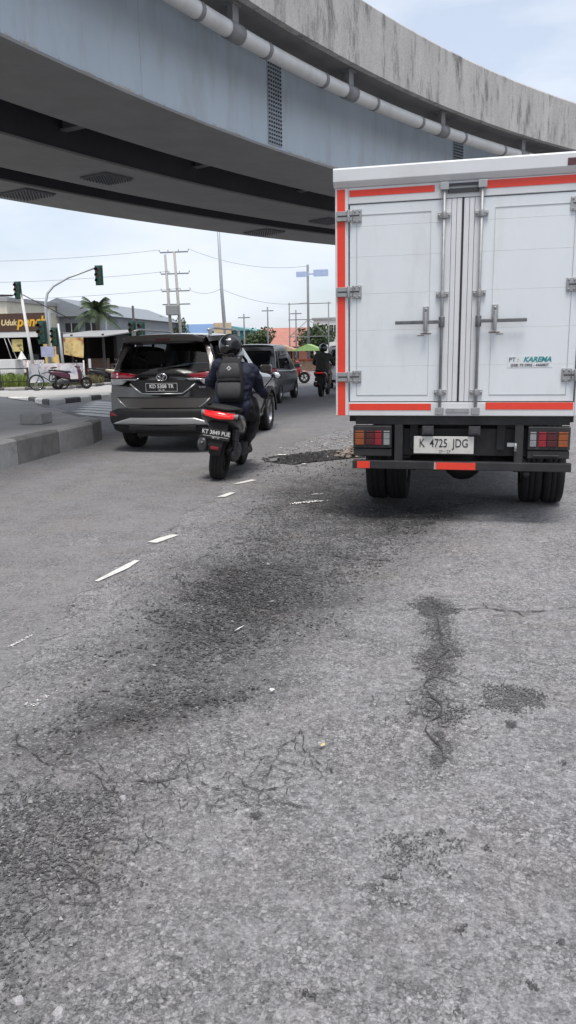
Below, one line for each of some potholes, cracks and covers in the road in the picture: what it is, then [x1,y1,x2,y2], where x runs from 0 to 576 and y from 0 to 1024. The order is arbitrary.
crack [0,726,344,966]
crack [356,600,575,768]
pothole [263,449,365,465]
